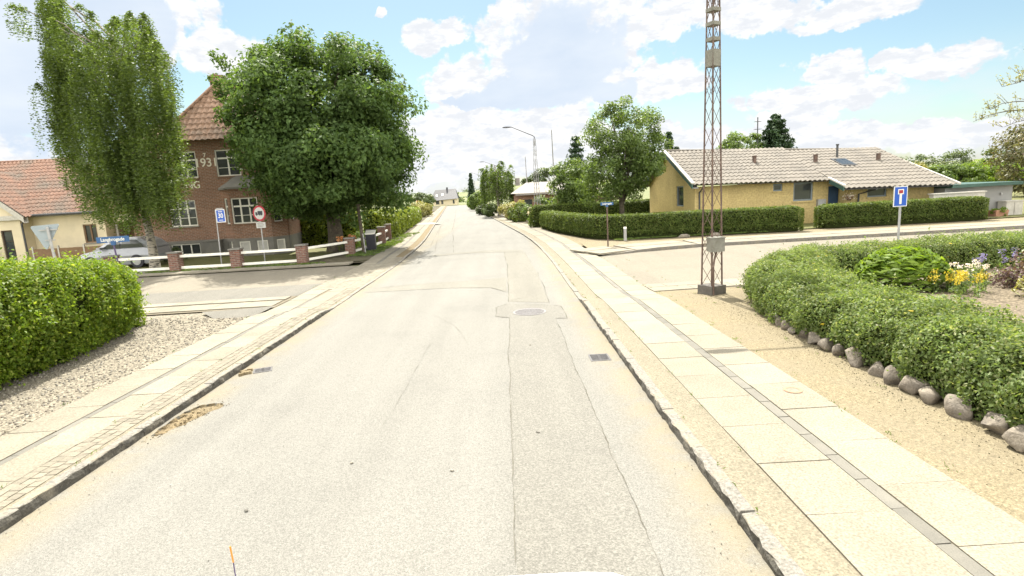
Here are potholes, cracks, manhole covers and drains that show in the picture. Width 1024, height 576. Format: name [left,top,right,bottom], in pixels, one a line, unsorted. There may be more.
pothole [151,403,225,436]
manhole cover [513,308,546,316]
drain grate [588,353,611,361]
